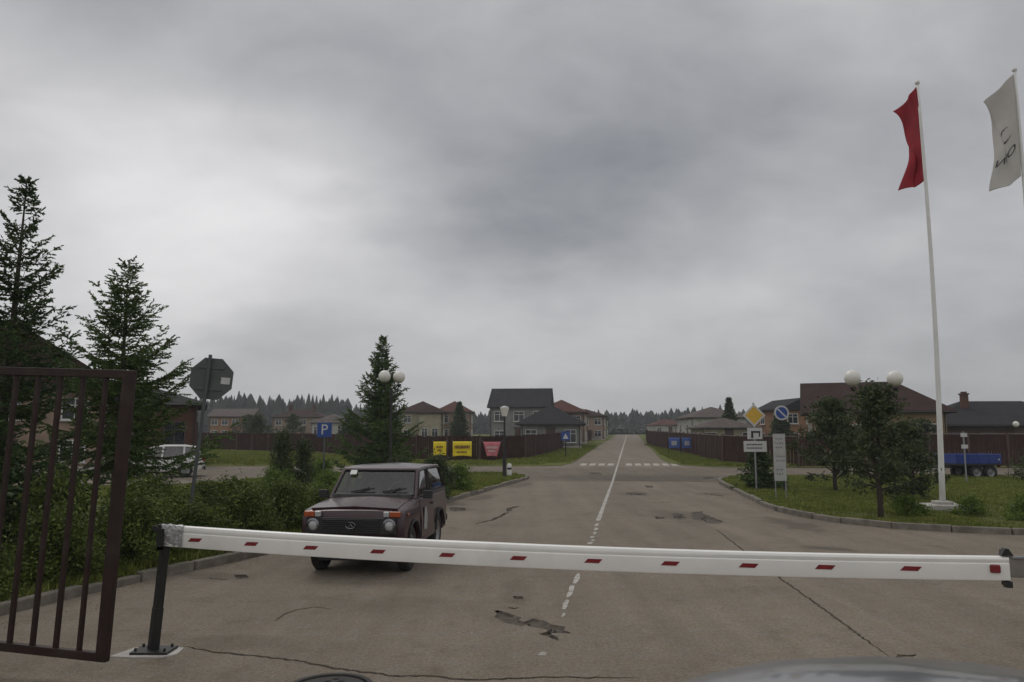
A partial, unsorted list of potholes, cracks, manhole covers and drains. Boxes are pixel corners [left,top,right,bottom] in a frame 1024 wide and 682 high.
crack [276,607,329,621]
crack [183,646,635,681]
crack [716,529,916,658]
crack [474,506,519,524]
pothole [495,610,570,640]
pothole [691,511,723,524]
